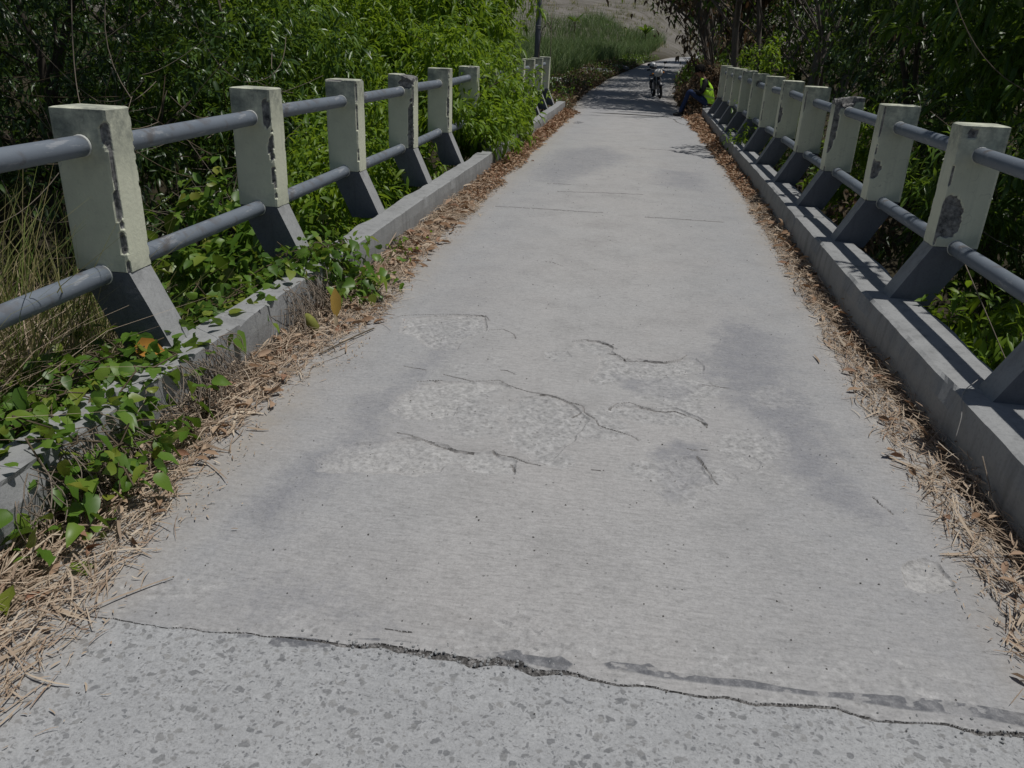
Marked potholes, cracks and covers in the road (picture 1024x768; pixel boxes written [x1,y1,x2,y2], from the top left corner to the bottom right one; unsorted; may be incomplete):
crack [25,606,1024,738]
crack [572,339,687,364]
crack [404,366,708,439]
crack [492,450,541,474]
crack [402,314,516,339]
crack [397,432,475,455]
crack [687,448,717,485]
